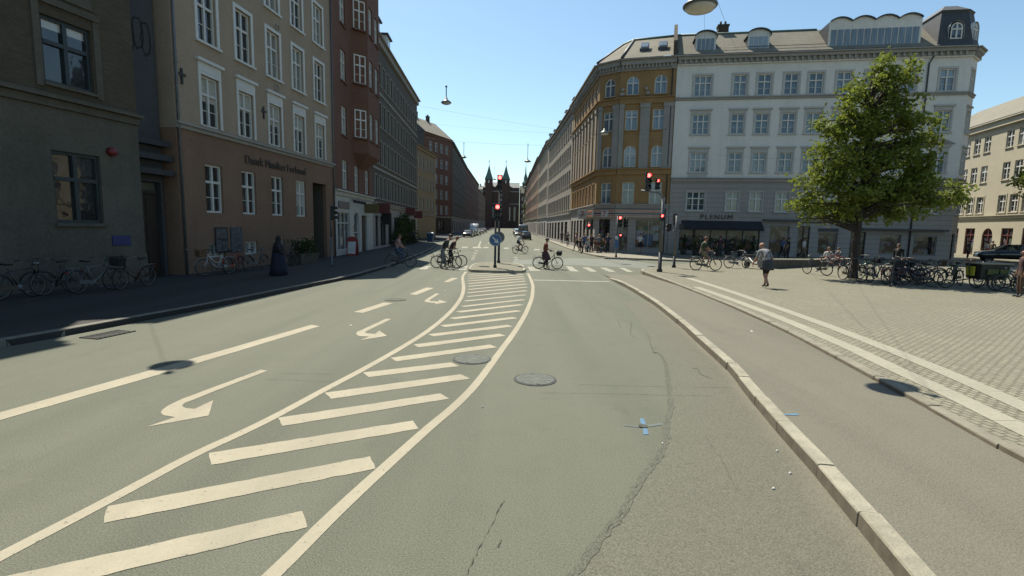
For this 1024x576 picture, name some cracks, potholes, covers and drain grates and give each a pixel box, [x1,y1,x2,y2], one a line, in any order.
drain grate [79,329,136,340]
manhole cover [514,373,557,386]
crack [544,368,727,396]
manhole cover [453,354,491,364]
